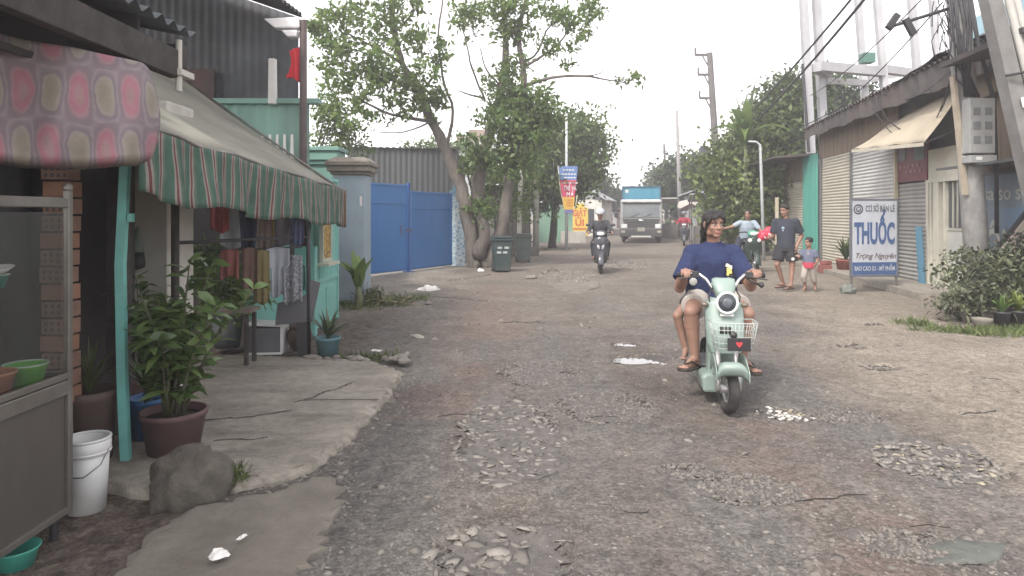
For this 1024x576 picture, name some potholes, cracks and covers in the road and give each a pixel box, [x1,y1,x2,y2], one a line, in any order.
pothole [871,440,1011,489]
pothole [859,363,905,371]
pothole [421,521,572,576]
pothole [756,406,829,423]
crack [205,381,355,421]
pothole [448,392,568,495]
crack [790,493,868,502]
